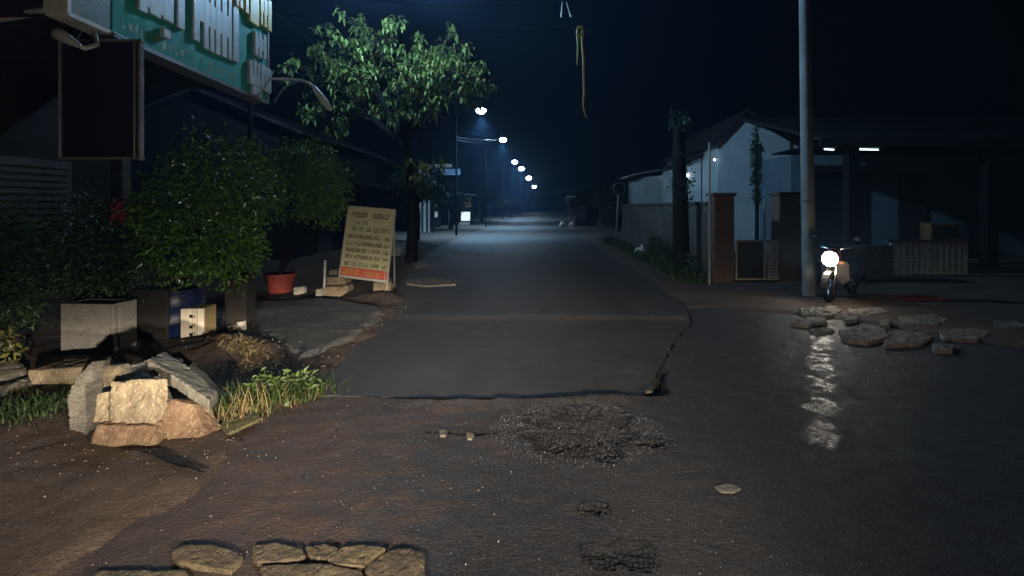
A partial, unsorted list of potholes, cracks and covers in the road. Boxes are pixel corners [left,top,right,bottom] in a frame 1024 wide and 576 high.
pothole [576,502,612,516]
pothole [514,404,643,465]
pothole [628,438,673,450]
pothole [579,539,661,572]
